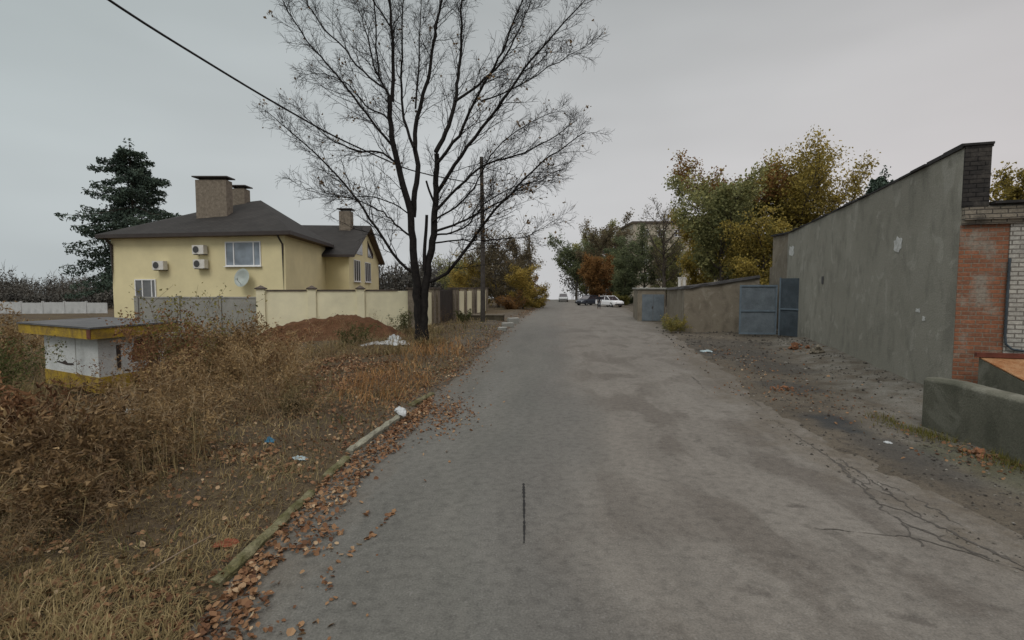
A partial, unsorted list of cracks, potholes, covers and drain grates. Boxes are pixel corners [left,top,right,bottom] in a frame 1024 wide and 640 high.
crack [774,419,1024,571]
